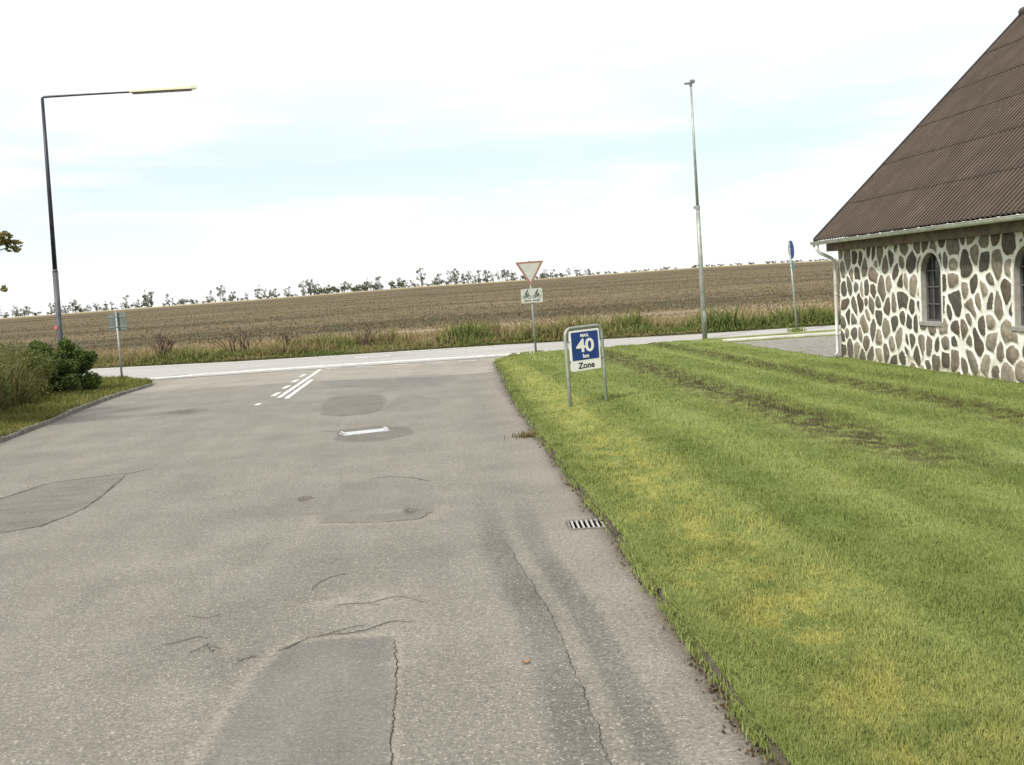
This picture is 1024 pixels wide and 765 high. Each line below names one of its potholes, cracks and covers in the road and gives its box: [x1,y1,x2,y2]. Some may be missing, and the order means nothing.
drain grate [566,518,608,530]
crack [278,596,423,651]
crack [166,636,257,662]
